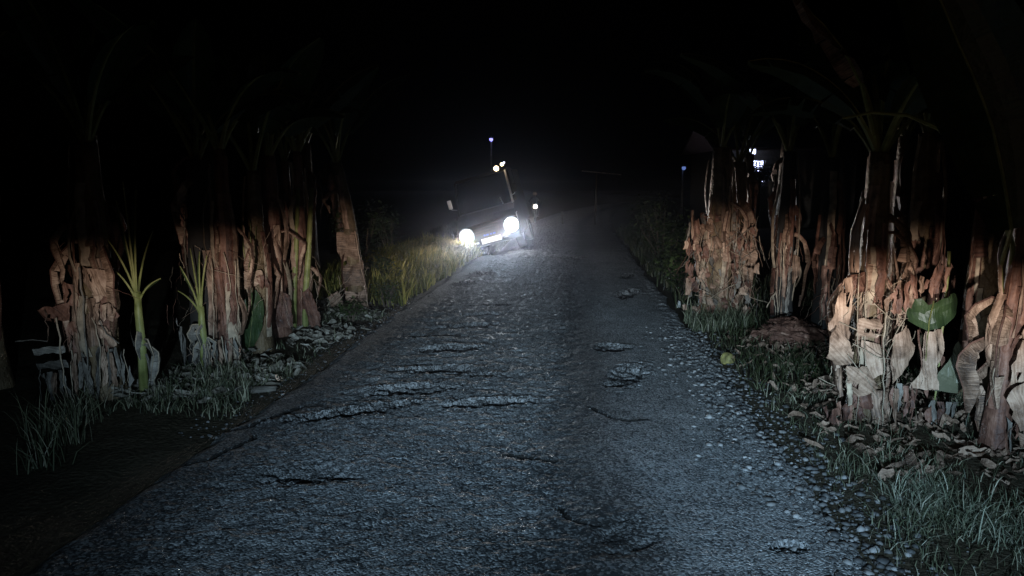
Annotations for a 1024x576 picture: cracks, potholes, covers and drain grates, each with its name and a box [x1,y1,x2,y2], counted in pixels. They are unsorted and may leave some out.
pothole [593,342,634,353]
crack [555,507,593,527]
pothole [767,539,812,554]
pothole [599,362,654,393]
pothole [395,363,491,374]
pothole [612,288,641,300]
pothole [279,398,424,424]
pothole [411,343,486,353]
pothole [363,382,464,398]
crack [586,406,650,422]
crack [501,454,558,463]
pothole [437,395,545,409]
